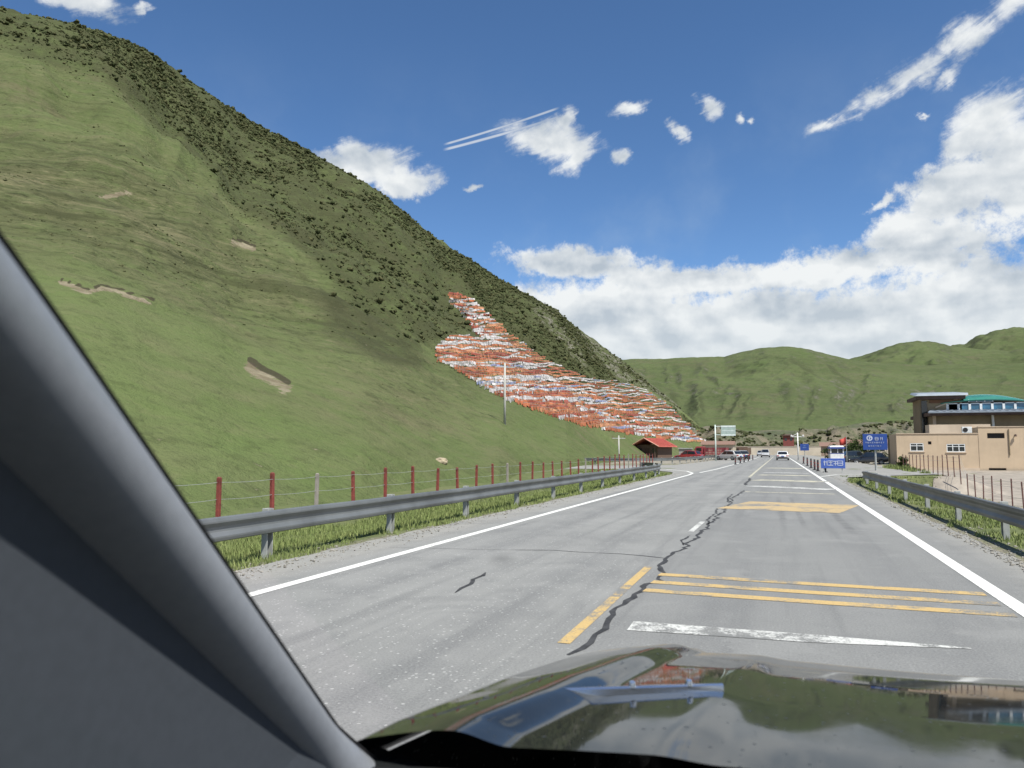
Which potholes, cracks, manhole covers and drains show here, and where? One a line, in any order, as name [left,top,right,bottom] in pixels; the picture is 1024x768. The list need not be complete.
crack [399,478,752,655]
